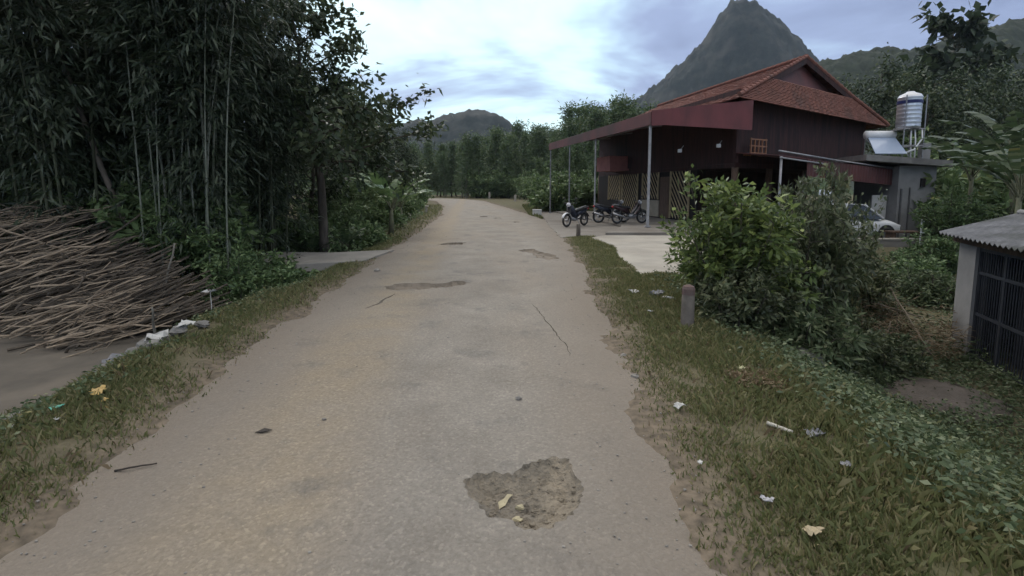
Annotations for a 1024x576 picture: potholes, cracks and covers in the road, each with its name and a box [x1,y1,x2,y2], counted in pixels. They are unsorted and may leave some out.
pothole [463,456,584,530]
pothole [519,249,559,260]
pothole [384,281,466,290]
